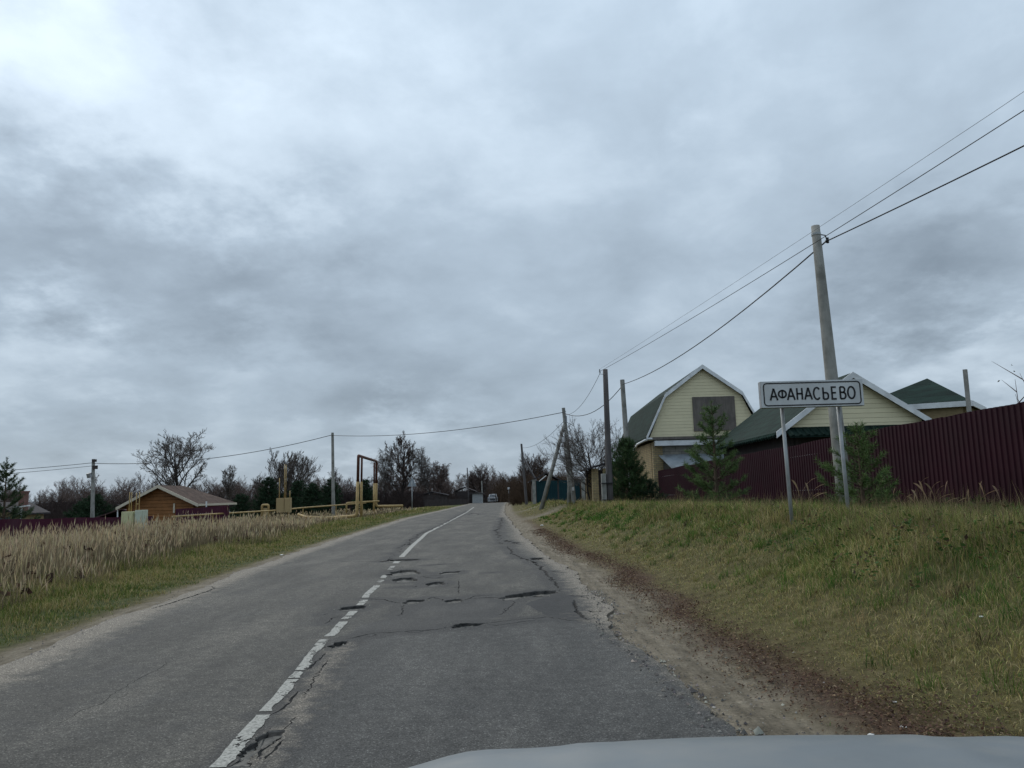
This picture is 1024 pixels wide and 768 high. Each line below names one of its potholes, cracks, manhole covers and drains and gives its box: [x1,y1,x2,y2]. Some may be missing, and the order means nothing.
crack [491,518,600,620]
pothole [498,590,561,601]
crack [257,654,328,759]
